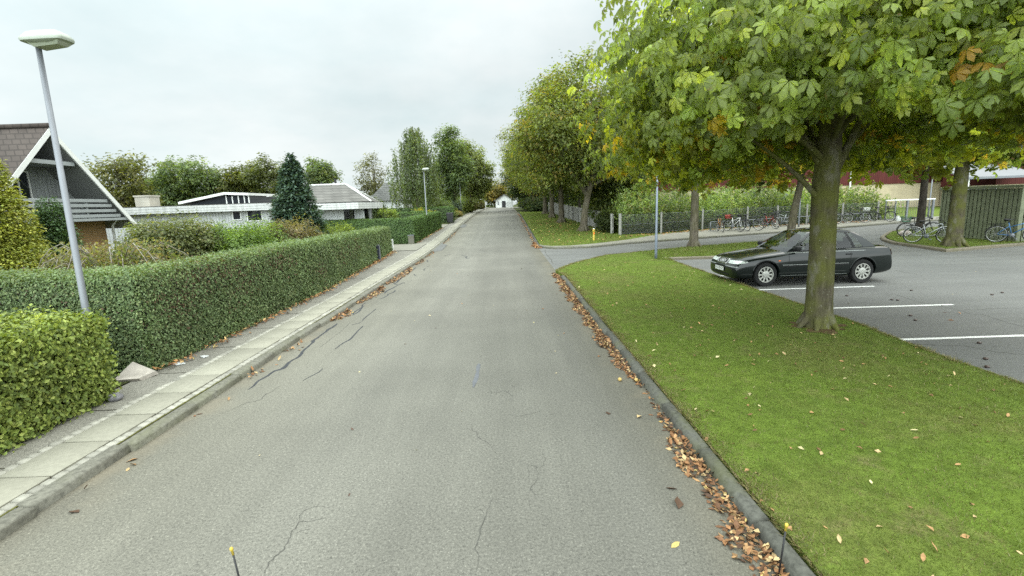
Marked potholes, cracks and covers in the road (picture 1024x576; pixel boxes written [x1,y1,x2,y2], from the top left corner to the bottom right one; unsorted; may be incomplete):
crack [265,506,327,570]
